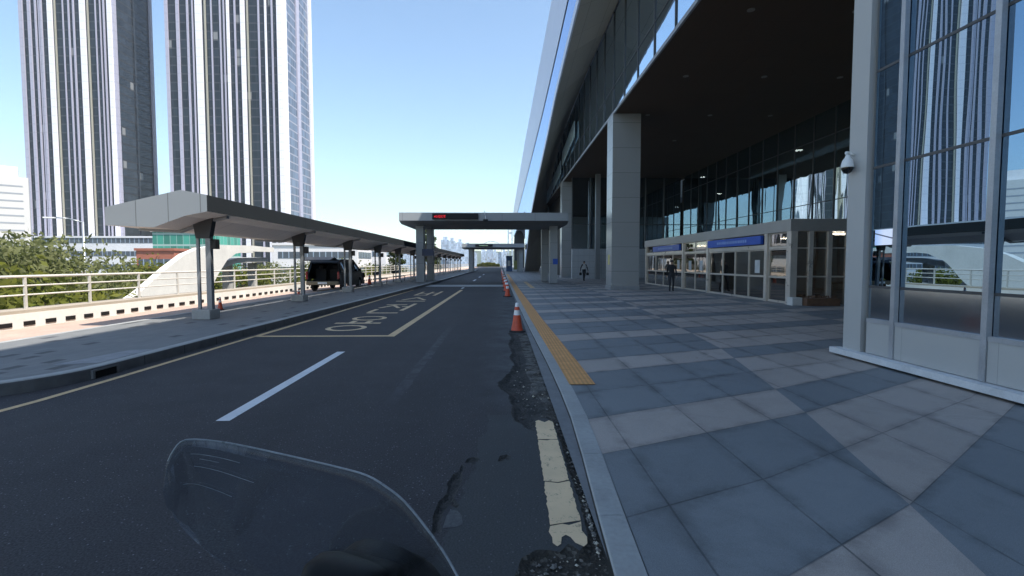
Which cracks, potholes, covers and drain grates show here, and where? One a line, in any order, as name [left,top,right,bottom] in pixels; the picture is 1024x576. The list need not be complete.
pothole [497,333,546,431]
crack [431,464,465,535]
